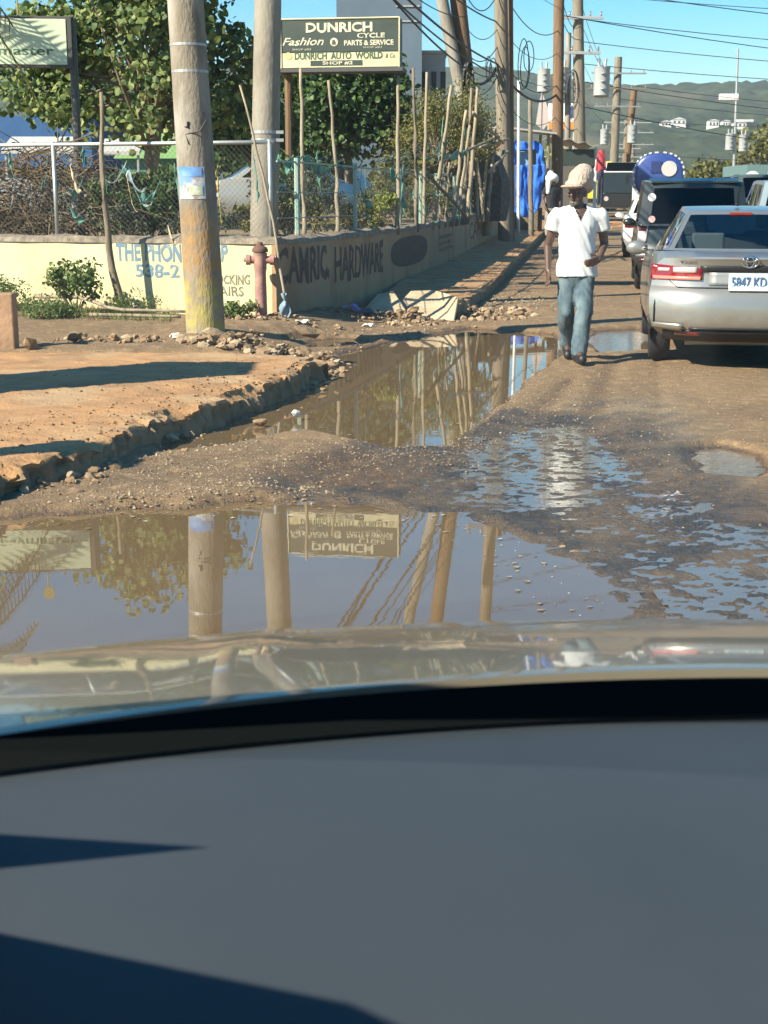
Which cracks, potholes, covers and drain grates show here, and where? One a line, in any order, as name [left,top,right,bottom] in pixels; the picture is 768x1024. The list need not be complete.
pothole [150,324,564,452]
pothole [685,442,768,477]
pothole [0,489,656,655]
pothole [588,326,648,352]
